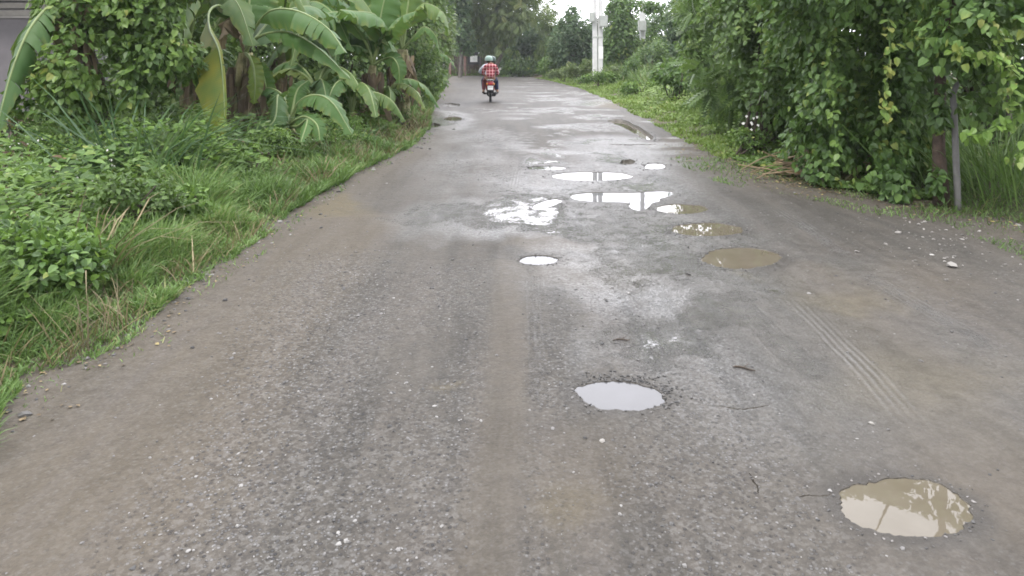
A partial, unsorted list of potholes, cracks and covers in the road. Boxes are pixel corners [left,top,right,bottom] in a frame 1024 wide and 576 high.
pothole [639,162,678,171]
pothole [567,370,693,415]
pothole [523,197,568,211]
pothole [542,171,639,182]
pothole [650,203,719,215]
pothole [660,220,752,238]
pothole [513,254,569,267]
pothole [570,189,674,213]
pothole [824,470,1007,550]
pothole [692,246,789,271]
pothole [601,117,662,141]
